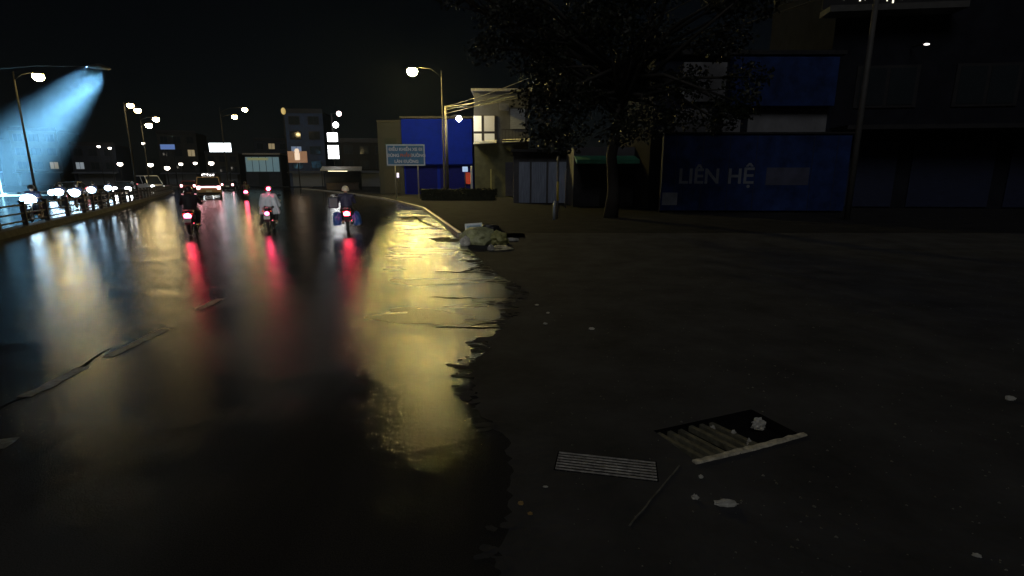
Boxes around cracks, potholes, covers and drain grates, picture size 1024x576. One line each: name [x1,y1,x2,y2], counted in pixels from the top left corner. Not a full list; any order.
drain grate [655,410,807,464]
drain grate [554,451,659,482]
